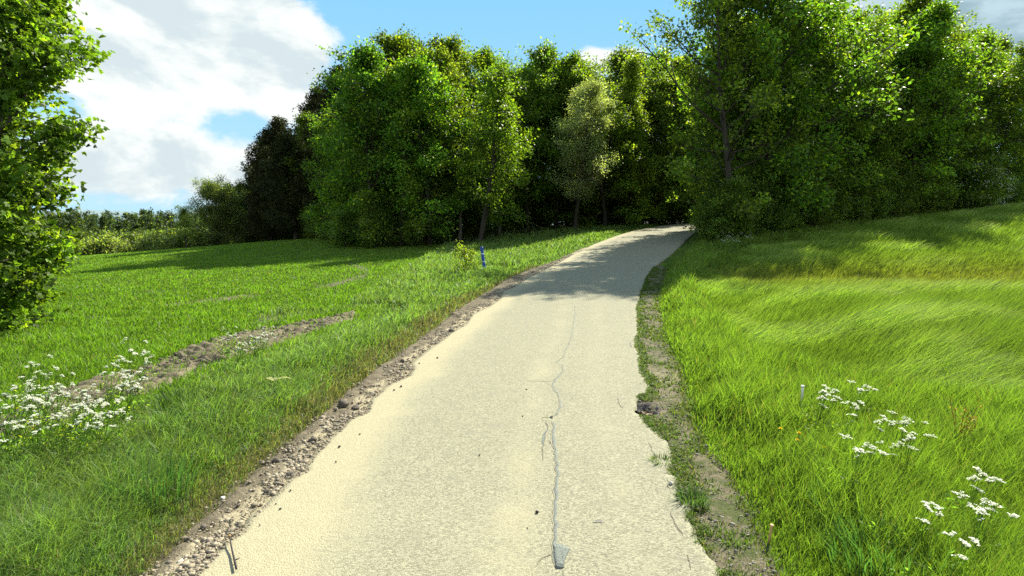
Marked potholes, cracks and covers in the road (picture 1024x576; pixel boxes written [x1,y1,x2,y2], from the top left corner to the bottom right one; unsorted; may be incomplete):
crack [536,305,576,567]
pothole [635,402,661,416]
